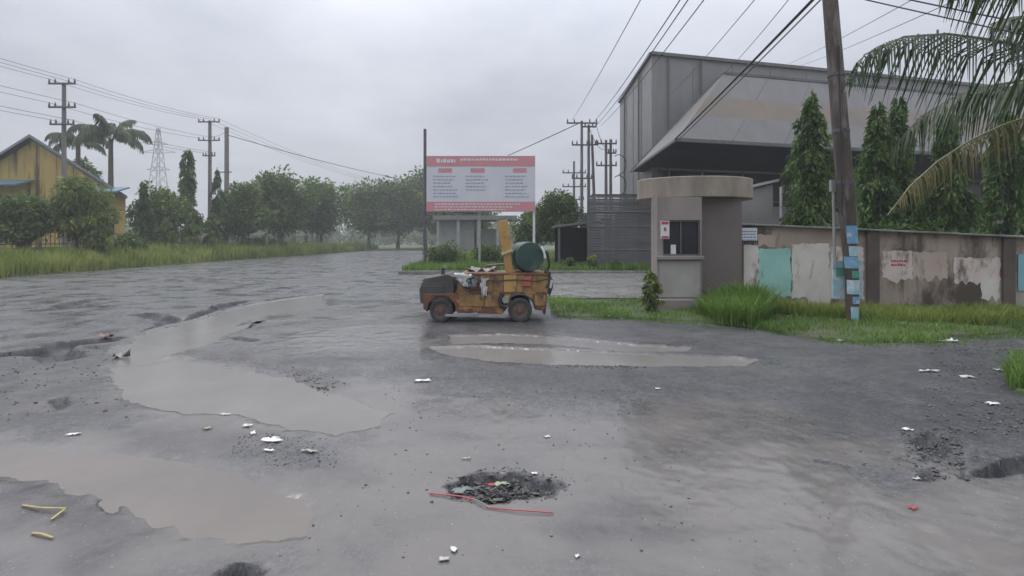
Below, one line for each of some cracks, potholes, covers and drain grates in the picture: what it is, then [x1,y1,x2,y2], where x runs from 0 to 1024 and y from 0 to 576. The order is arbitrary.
pothole [907,431,955,458]
pothole [970,456,1024,478]
pothole [917,471,942,481]
pothole [211,563,268,576]
pothole [443,472,567,504]
pothole [108,295,327,367]
